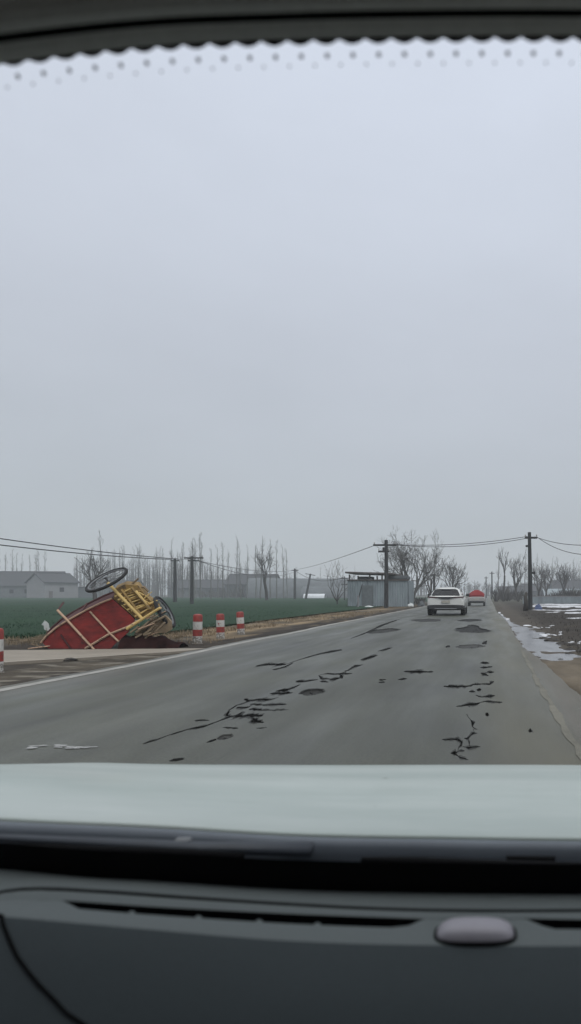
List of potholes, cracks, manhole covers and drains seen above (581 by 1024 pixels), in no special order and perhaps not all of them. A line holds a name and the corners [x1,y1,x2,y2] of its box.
pothole [456,625,491,633]
crack [143,619,502,760]
